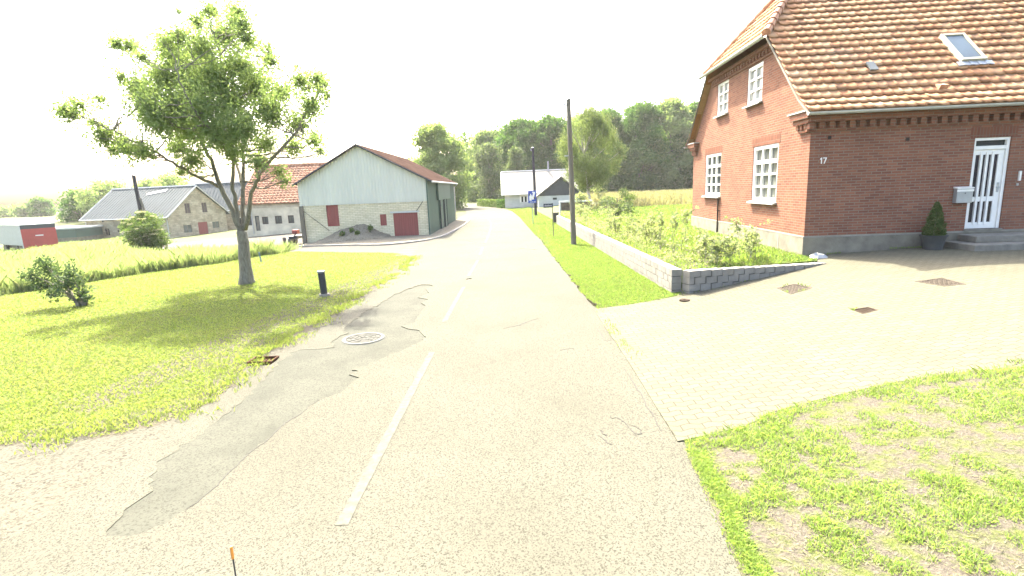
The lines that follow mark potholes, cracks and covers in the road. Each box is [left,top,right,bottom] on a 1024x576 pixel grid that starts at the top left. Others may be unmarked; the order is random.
manhole cover [341,332,386,345]
drain grate [247,356,279,365]
manhole cover [915,278,965,286]
manhole cover [778,284,812,294]
crack [599,367,662,445]
